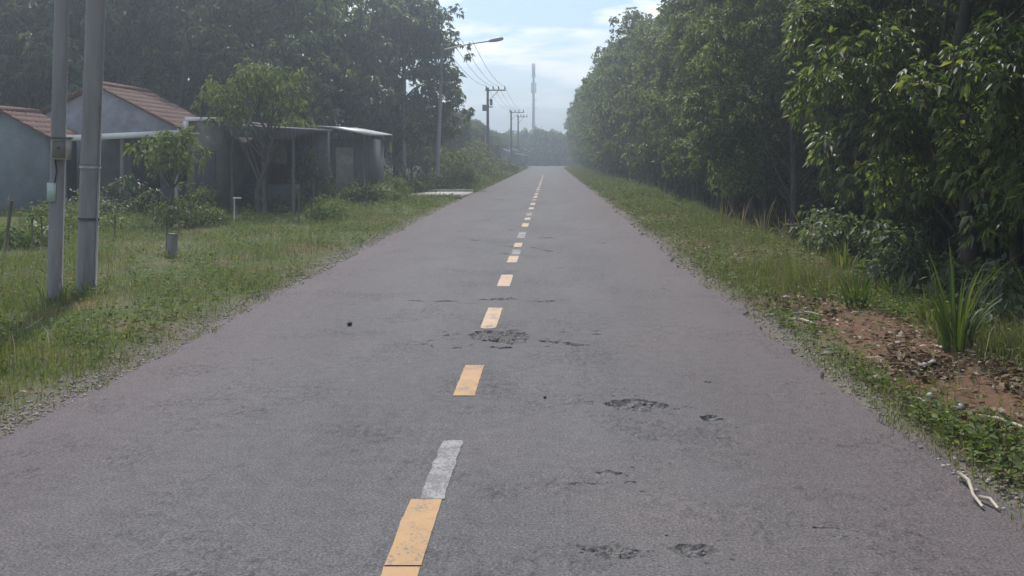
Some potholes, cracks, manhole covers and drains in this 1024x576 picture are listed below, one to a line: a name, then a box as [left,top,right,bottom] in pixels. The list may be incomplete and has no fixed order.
crack [564,467,648,493]
pothole [421,329,602,350]
pothole [567,539,657,566]
pothole [581,394,700,416]
